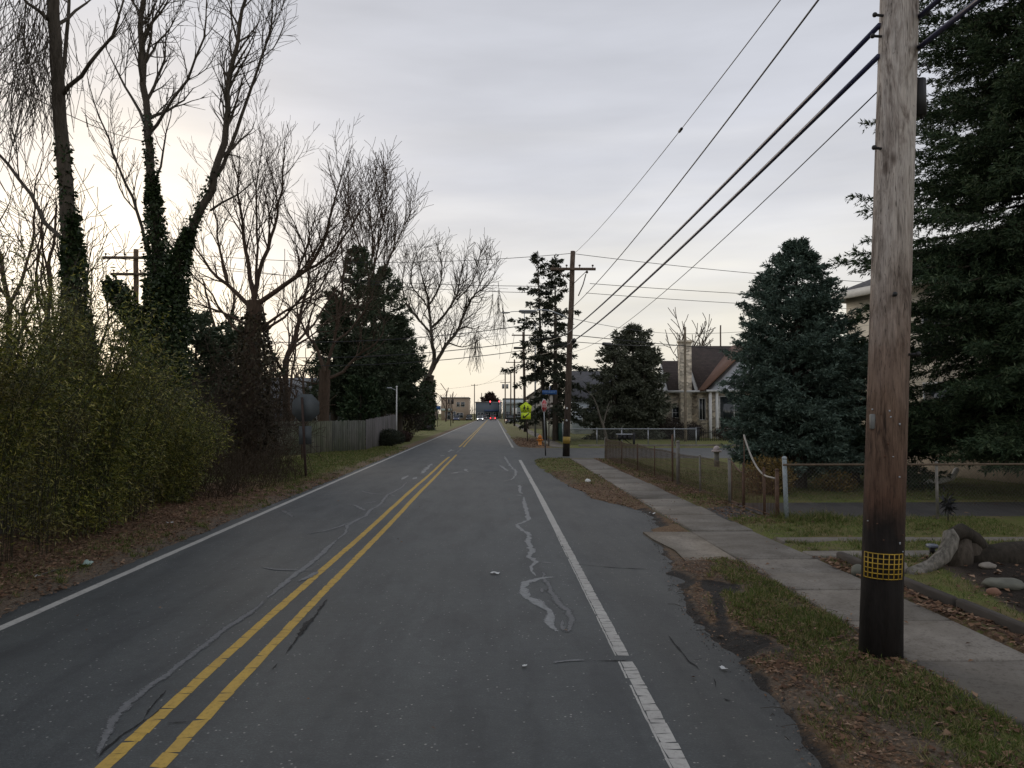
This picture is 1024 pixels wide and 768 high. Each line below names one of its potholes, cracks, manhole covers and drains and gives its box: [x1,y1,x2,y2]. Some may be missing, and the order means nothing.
crack [96,599,327,757]
crack [281,493,343,517]
crack [669,636,727,700]
